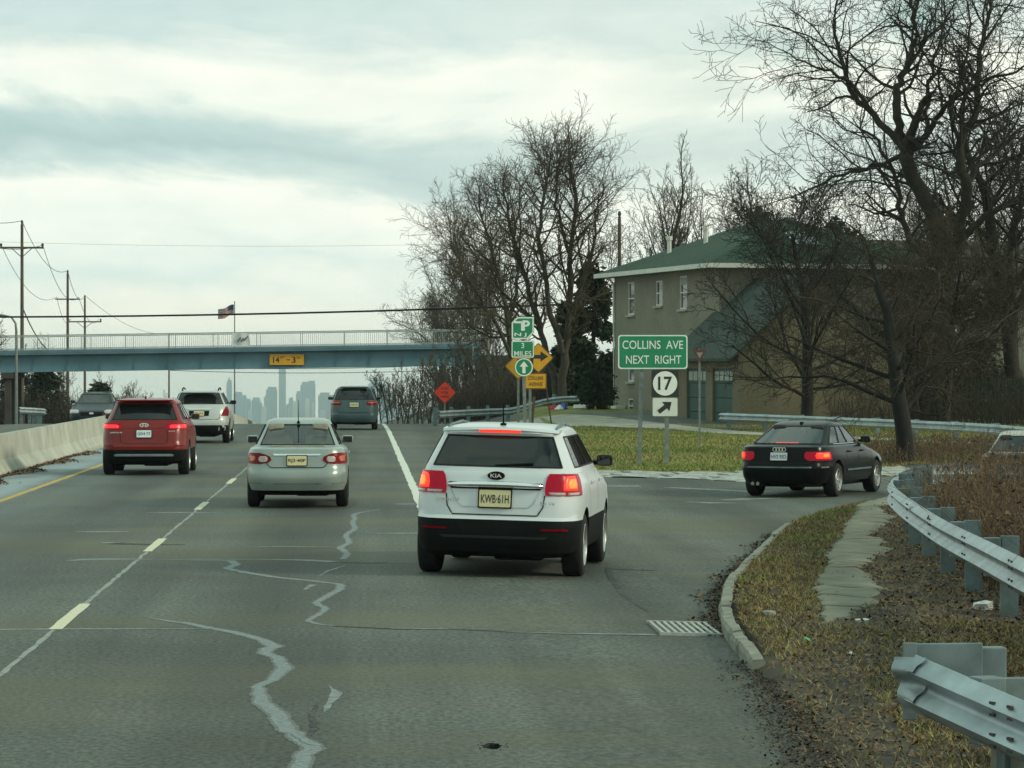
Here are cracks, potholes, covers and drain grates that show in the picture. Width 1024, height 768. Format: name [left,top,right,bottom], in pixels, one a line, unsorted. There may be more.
drain grate [646,620,723,637]
pothole [478,742,508,750]
crack [66,503,418,590]
